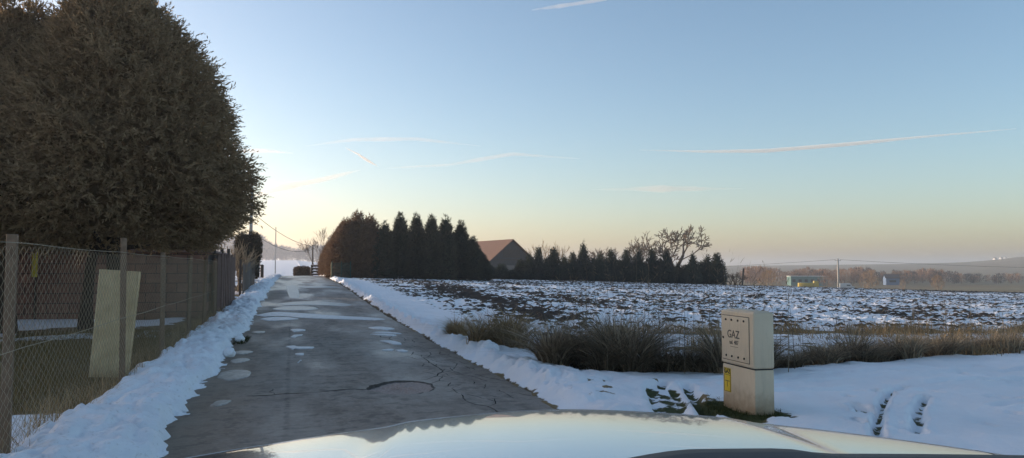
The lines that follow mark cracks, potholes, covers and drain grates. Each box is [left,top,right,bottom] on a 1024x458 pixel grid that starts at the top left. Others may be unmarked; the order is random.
crack [380,330,531,412]
